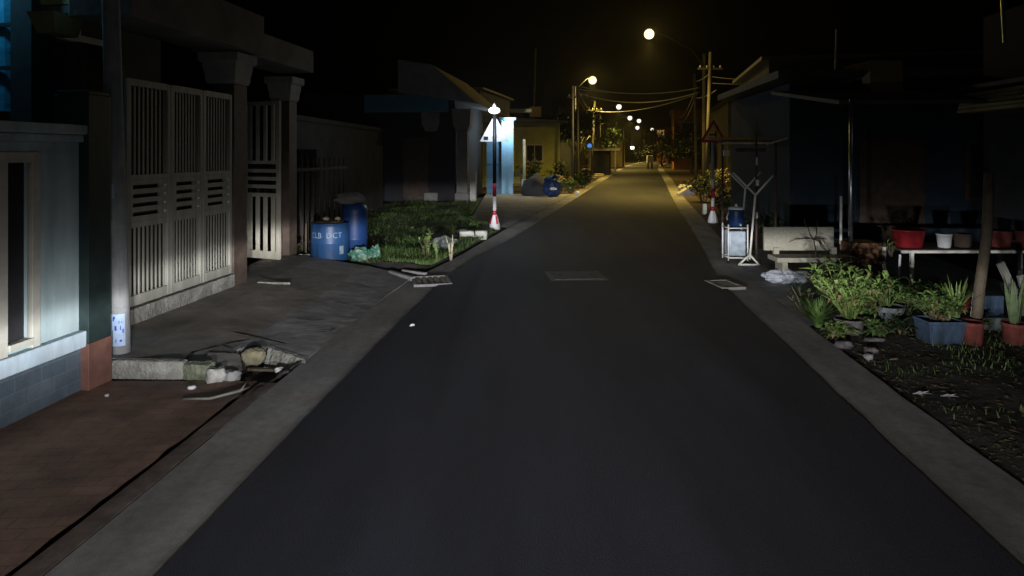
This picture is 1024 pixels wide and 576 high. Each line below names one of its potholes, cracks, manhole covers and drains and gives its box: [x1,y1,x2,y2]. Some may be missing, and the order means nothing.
pothole [195,353,303,404]
drain grate [412,275,452,287]
drain grate [704,279,746,290]
manhole cover [544,271,609,281]
